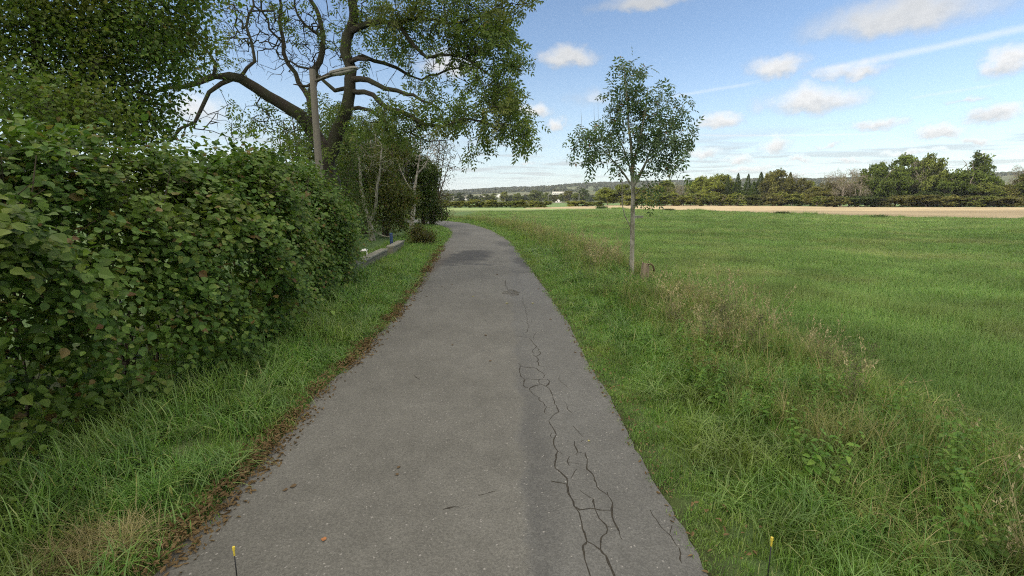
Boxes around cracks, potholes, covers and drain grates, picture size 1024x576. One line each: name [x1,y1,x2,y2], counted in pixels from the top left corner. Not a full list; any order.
crack [518,306,622,576]
crack [650,510,682,563]
